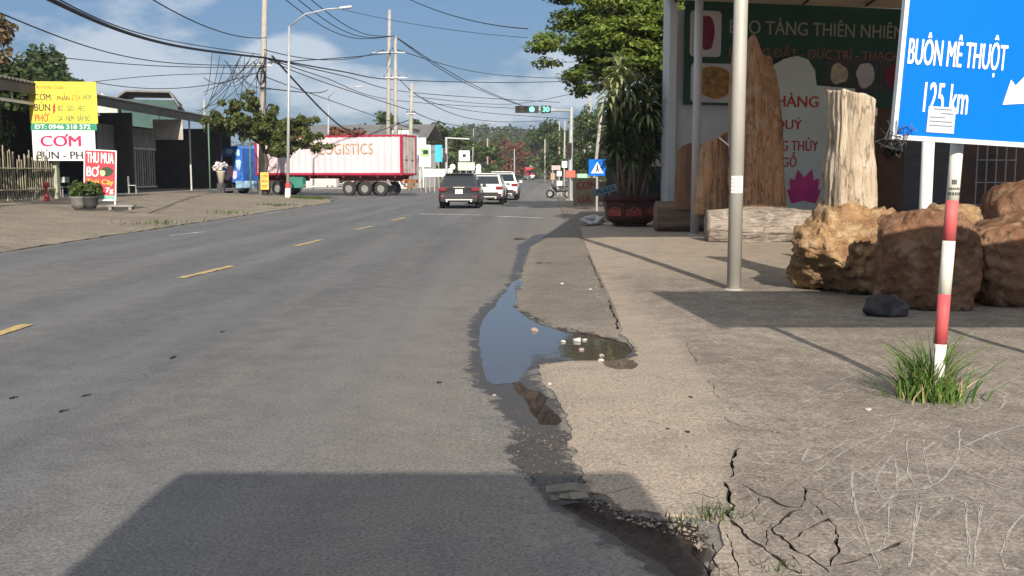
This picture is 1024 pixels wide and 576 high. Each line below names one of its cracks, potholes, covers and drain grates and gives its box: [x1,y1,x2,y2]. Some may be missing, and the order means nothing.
pothole [512,382,562,425]
crack [681,448,906,576]
pothole [558,329,633,352]
pothole [560,500,707,576]
